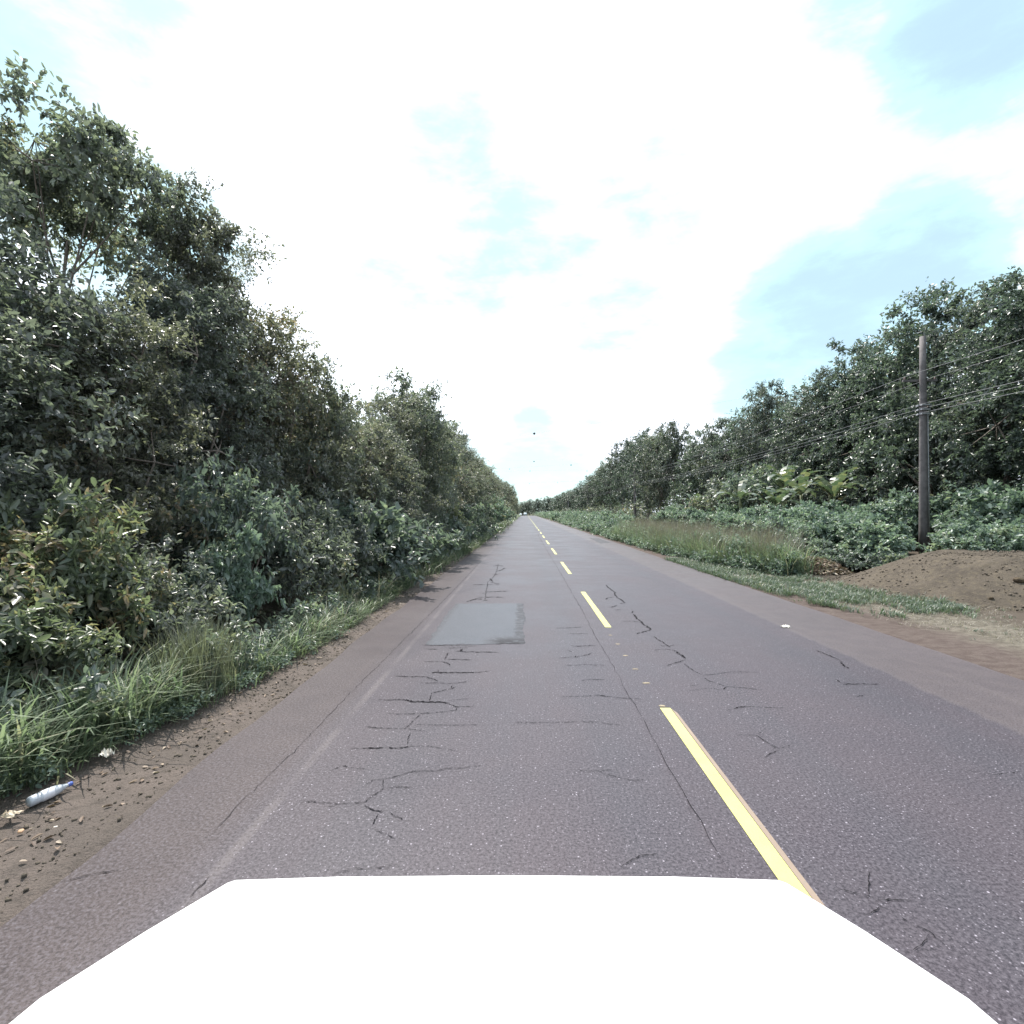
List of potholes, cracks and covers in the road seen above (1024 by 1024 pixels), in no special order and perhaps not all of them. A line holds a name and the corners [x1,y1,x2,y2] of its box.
crack [308,645,487,838]
crack [836,873,946,950]
crack [606,585,751,690]
crack [563,627,637,699]
